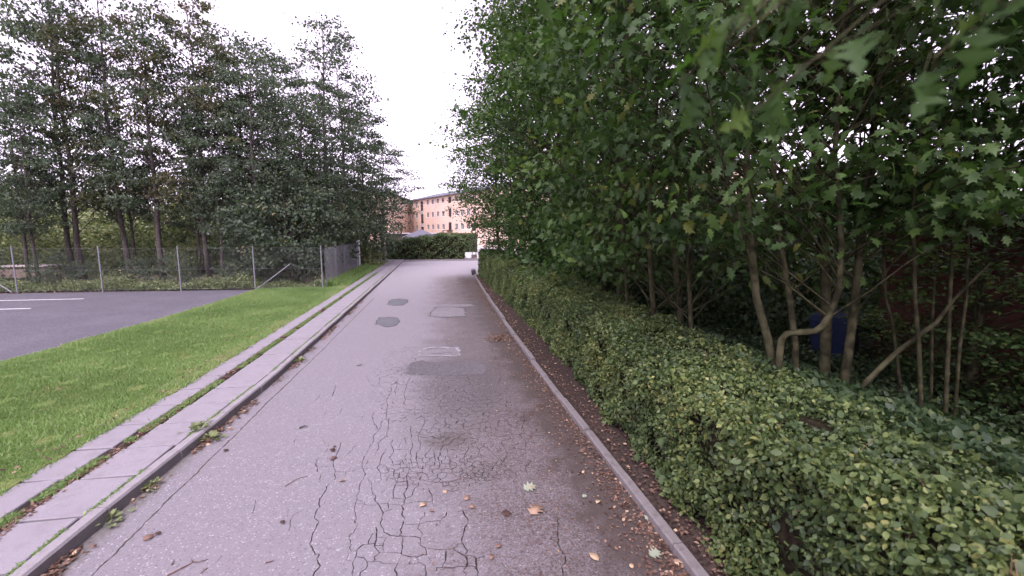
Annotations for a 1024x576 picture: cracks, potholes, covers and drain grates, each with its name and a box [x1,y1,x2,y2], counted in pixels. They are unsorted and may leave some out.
crack [557,517,566,576]
crack [287,440,360,576]
crack [346,348,537,576]
